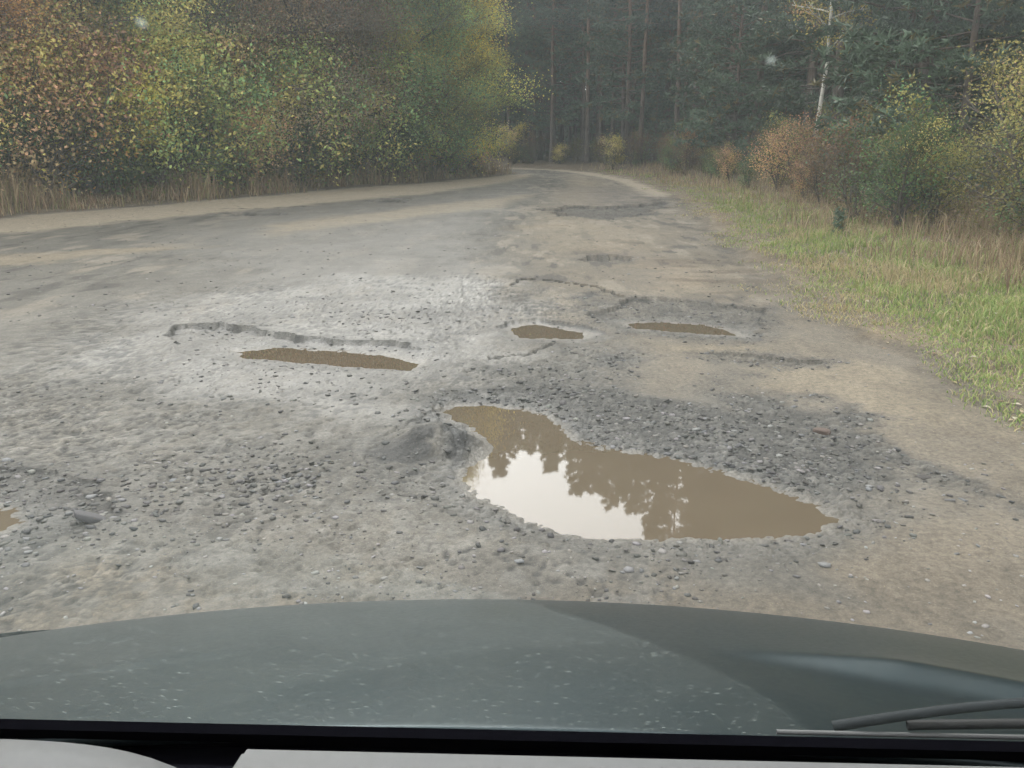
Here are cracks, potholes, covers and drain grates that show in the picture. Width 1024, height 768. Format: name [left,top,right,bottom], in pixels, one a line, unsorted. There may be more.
pothole [580,254,632,264]
crack [511,278,624,297]
pothole [493,318,616,343]
pothole [166,322,445,374]
pothole [537,199,678,220]
pothole [363,384,916,564]
